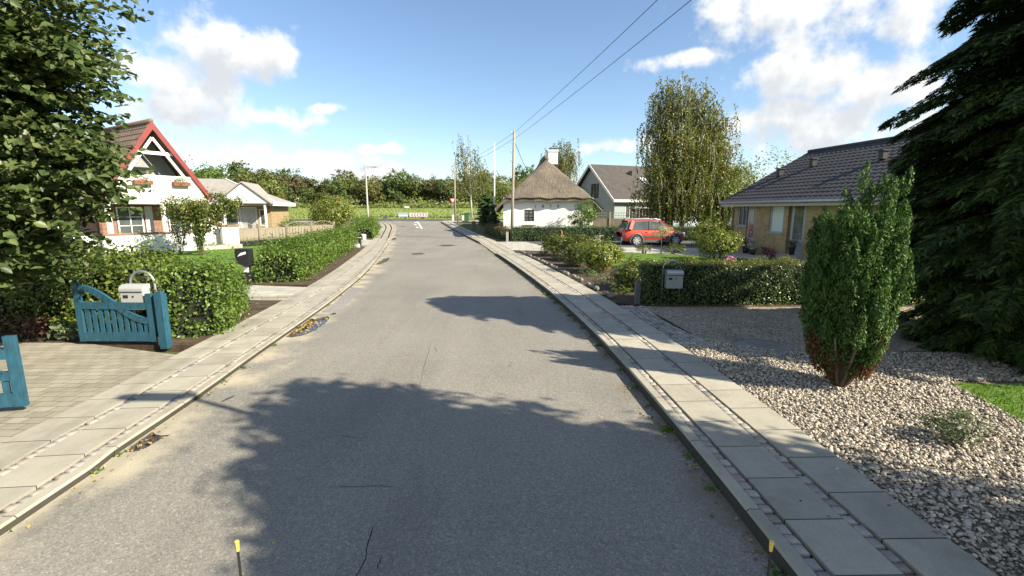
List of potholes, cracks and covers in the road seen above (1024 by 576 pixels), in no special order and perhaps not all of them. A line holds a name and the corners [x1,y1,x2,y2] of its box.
pothole [286,316,329,337]
pothole [129,432,171,452]
crack [356,523,382,576]
